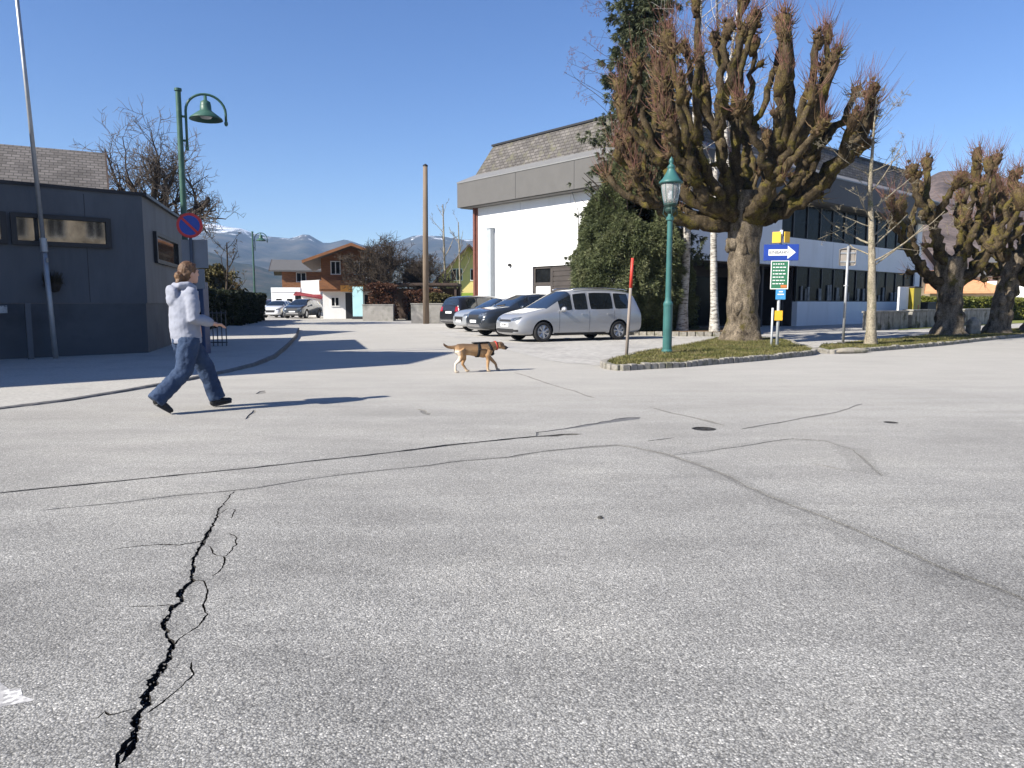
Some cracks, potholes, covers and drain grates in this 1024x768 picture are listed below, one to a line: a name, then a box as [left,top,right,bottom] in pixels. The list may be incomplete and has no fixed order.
crack [1,404,1024,768]
